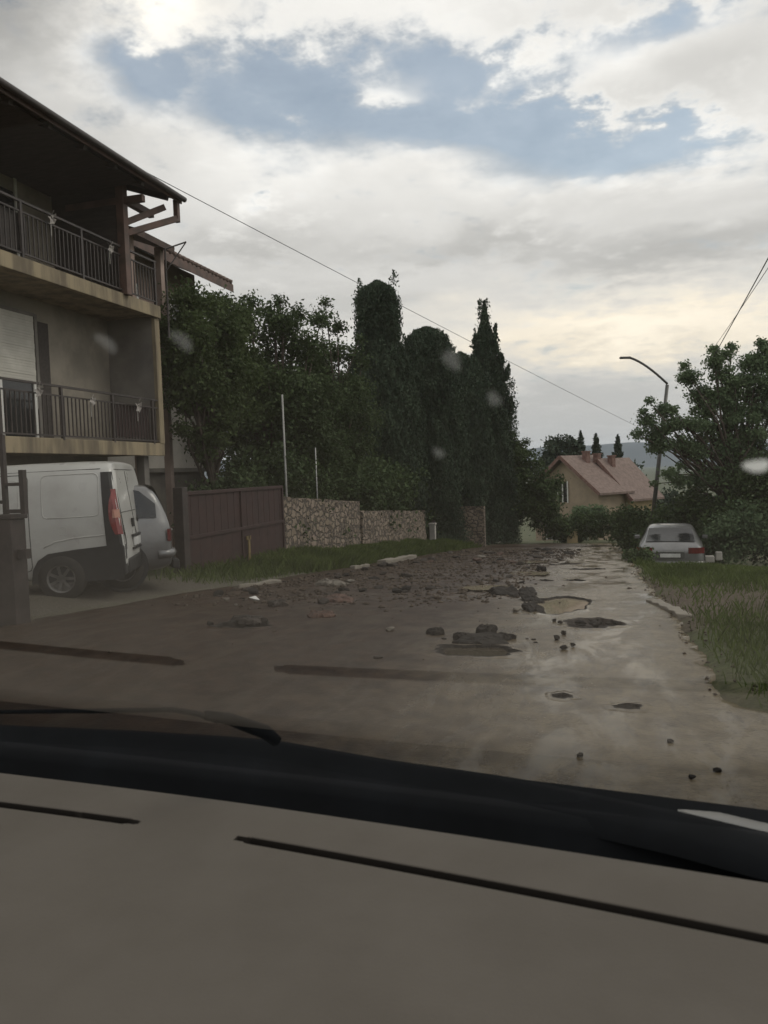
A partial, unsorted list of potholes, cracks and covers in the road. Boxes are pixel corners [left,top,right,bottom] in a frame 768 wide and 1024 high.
pothole [426,644,533,659]
pothole [600,702,653,713]
pothole [531,596,596,617]
pothole [545,690,582,702]
pothole [561,617,632,631]
